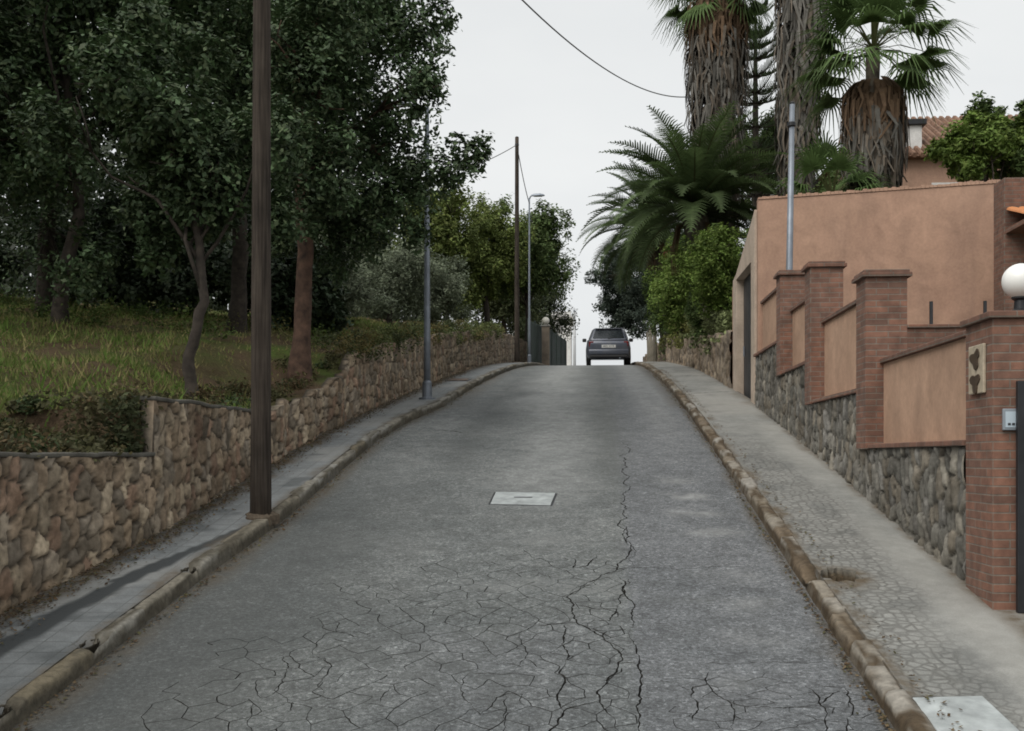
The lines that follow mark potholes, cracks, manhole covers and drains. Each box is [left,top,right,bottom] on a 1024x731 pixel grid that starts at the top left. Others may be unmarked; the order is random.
crack [141,441,738,731]
pothole [820,568,863,582]
manhole cover [488,492,558,506]
crack [660,661,888,731]
utility cover [913,696,1019,731]
